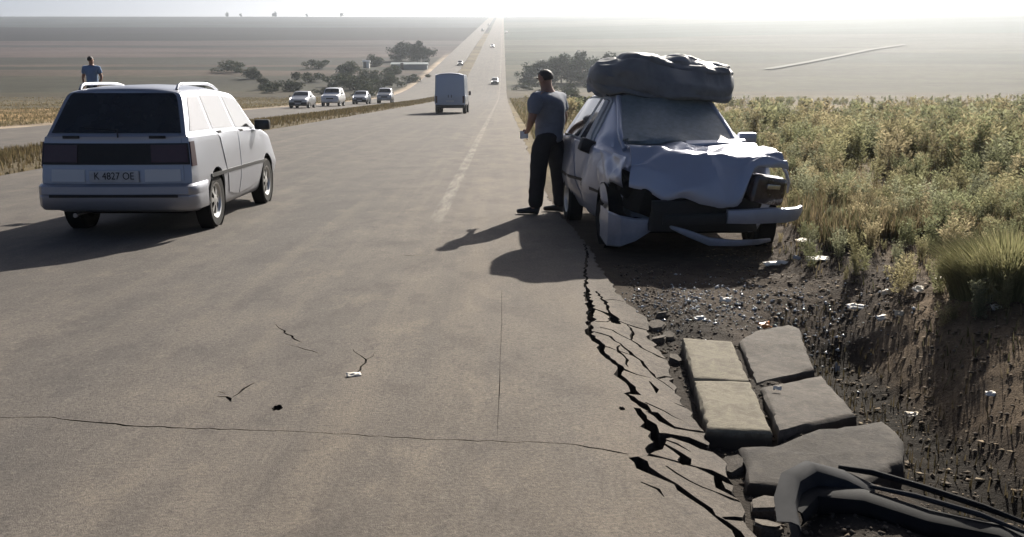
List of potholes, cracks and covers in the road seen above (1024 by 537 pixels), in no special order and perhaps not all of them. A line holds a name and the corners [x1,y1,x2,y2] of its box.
crack [17,244,744,537]
